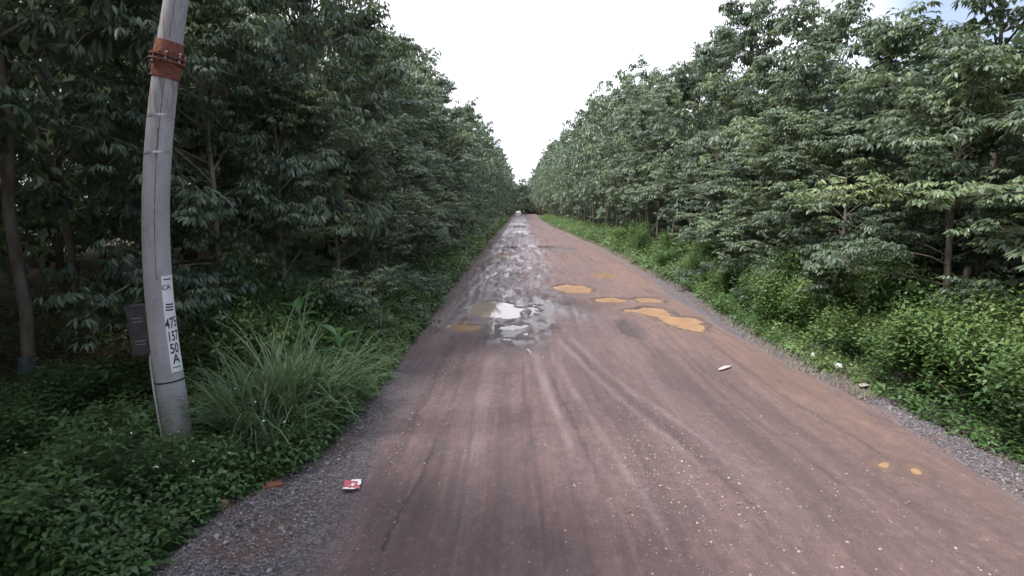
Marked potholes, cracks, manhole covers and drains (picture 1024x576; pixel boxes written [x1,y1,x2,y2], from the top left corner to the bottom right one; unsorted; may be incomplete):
pothole [464,299,529,321]
pothole [486,318,501,335]
pothole [495,322,533,331]
pothole [523,304,545,316]
crack [381,437,437,550]
